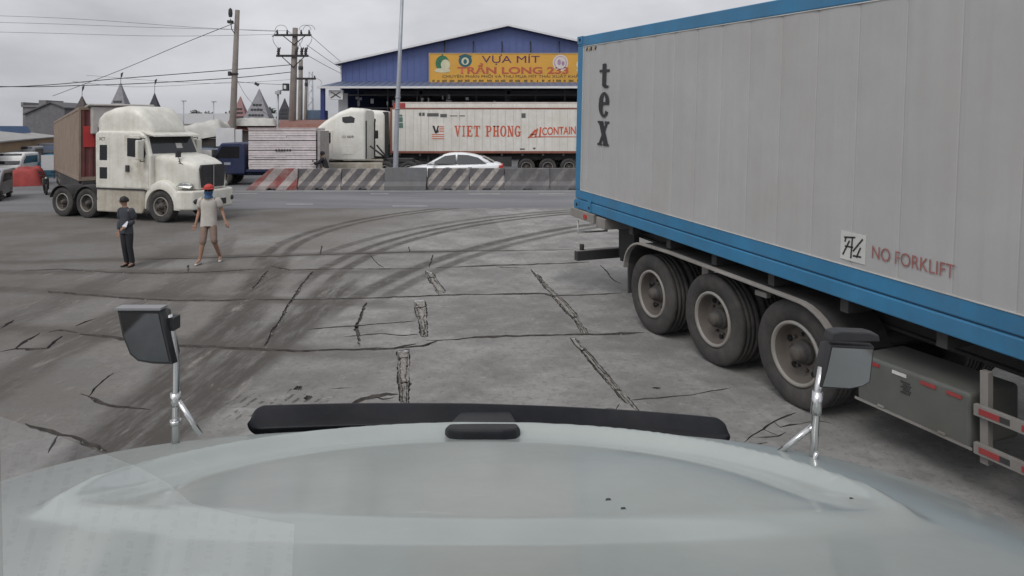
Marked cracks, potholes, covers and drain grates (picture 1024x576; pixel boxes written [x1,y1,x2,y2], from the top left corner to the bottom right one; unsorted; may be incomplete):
crack [26,373,151,453]
crack [25,265,418,346]
crack [745,413,829,444]
